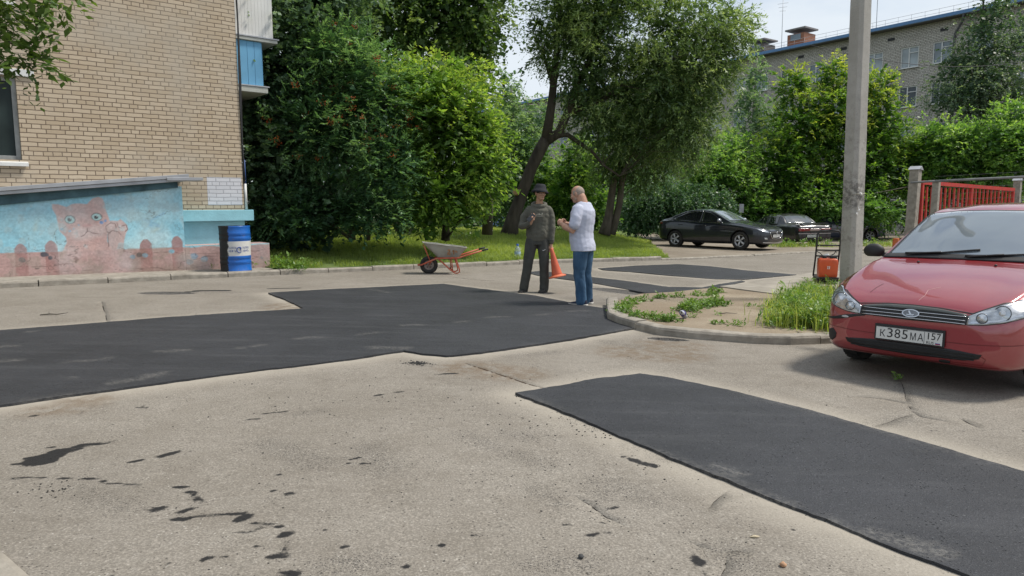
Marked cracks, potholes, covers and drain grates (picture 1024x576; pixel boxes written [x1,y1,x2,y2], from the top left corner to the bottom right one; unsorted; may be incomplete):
crack [565,493,634,531]
crack [847,379,989,431]
